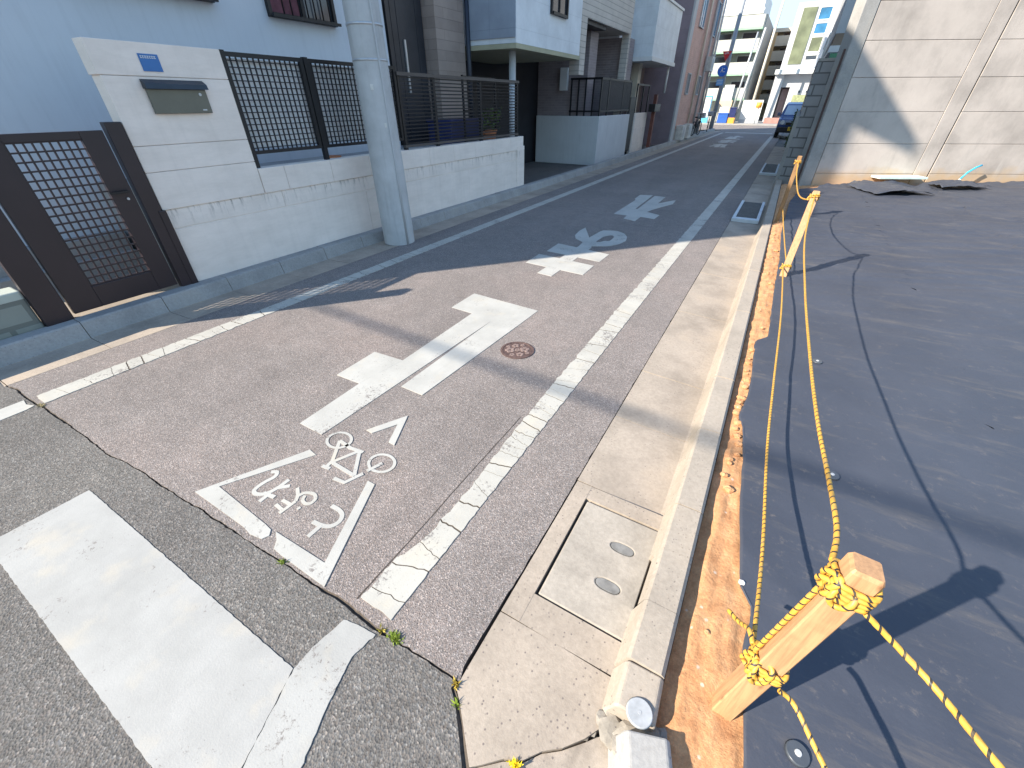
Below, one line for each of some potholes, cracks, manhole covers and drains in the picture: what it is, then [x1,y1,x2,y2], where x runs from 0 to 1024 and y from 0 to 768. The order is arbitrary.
manhole cover [501,342,534,359]
drain grate [731,200,765,224]
drain grate [759,163,780,176]
